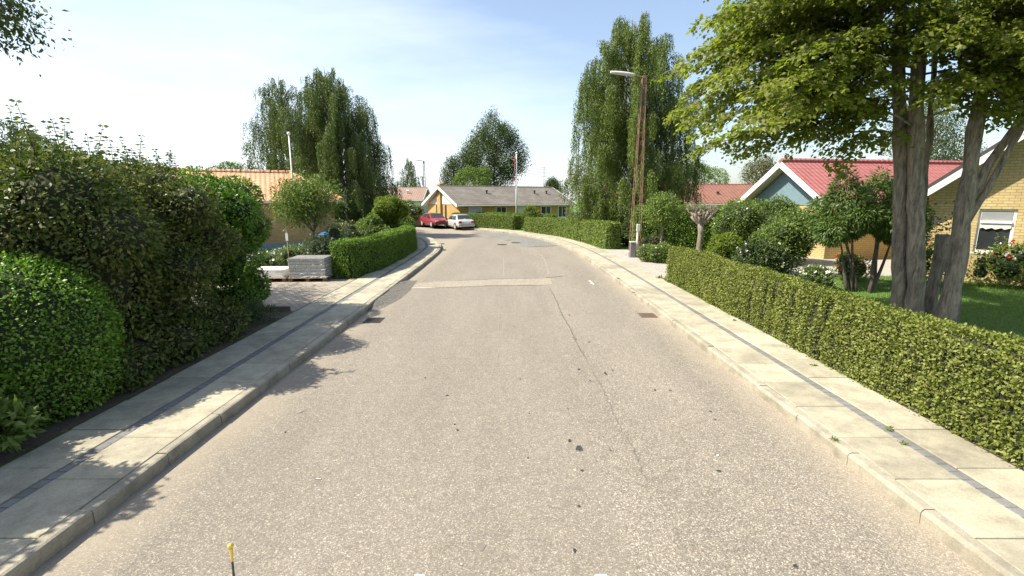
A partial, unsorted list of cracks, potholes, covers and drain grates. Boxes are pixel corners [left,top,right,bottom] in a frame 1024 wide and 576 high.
crack [533,246,647,480]
